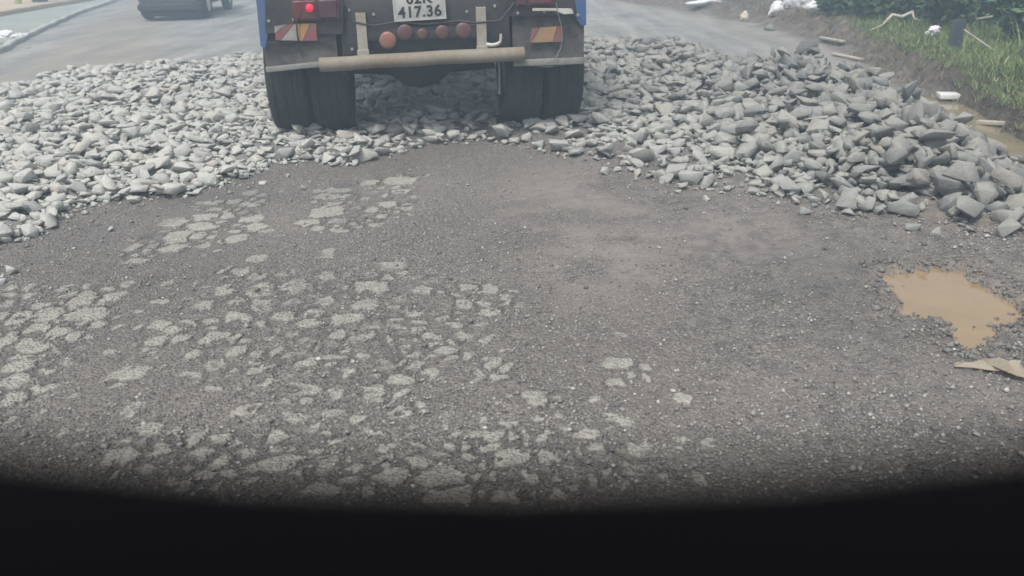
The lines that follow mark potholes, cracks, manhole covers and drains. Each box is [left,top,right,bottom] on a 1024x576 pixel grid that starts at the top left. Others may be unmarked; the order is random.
pothole [876,259,1024,349]
crack [0,286,121,425]
crack [122,172,647,472]
